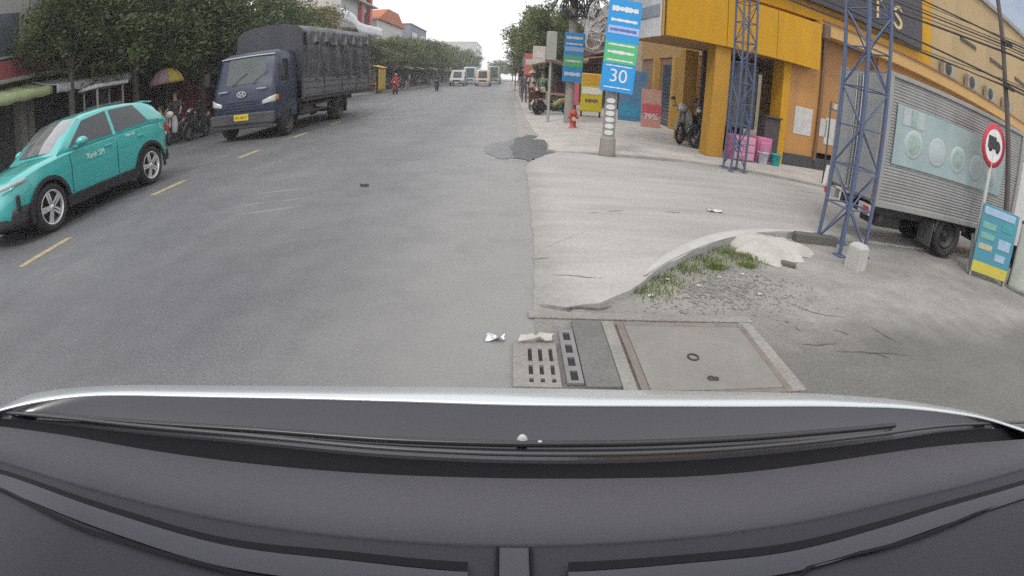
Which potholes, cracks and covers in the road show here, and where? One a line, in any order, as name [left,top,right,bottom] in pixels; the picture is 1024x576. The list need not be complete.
manhole cover [615,322,793,393]
crack [787,302,909,357]
drain grate [558,329,584,386]
drain grate [513,341,562,389]
